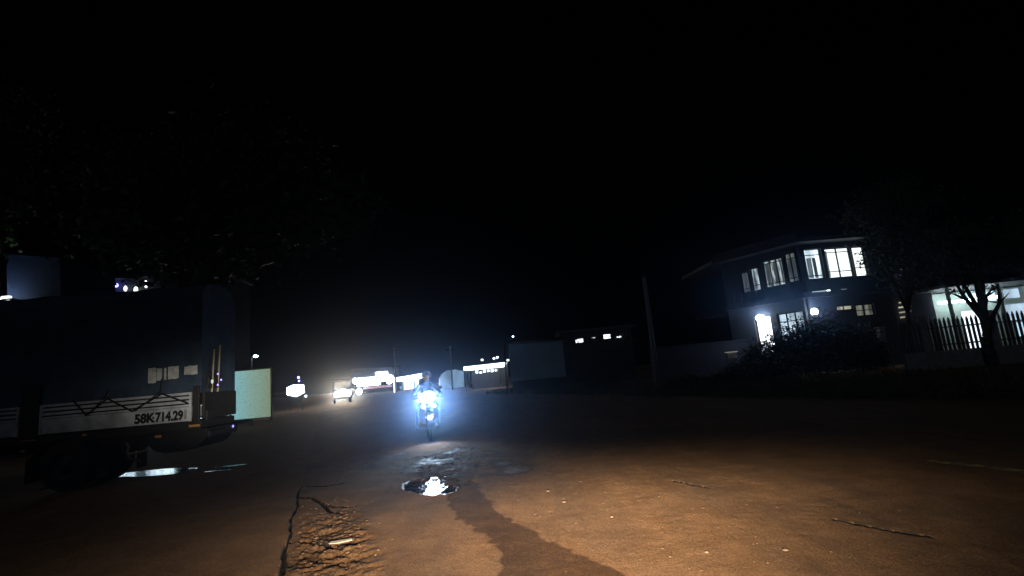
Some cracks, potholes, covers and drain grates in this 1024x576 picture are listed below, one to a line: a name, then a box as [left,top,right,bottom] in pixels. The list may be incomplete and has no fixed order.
pothole [402,479,458,495]
crack [832,519,931,538]
crack [278,483,358,576]
